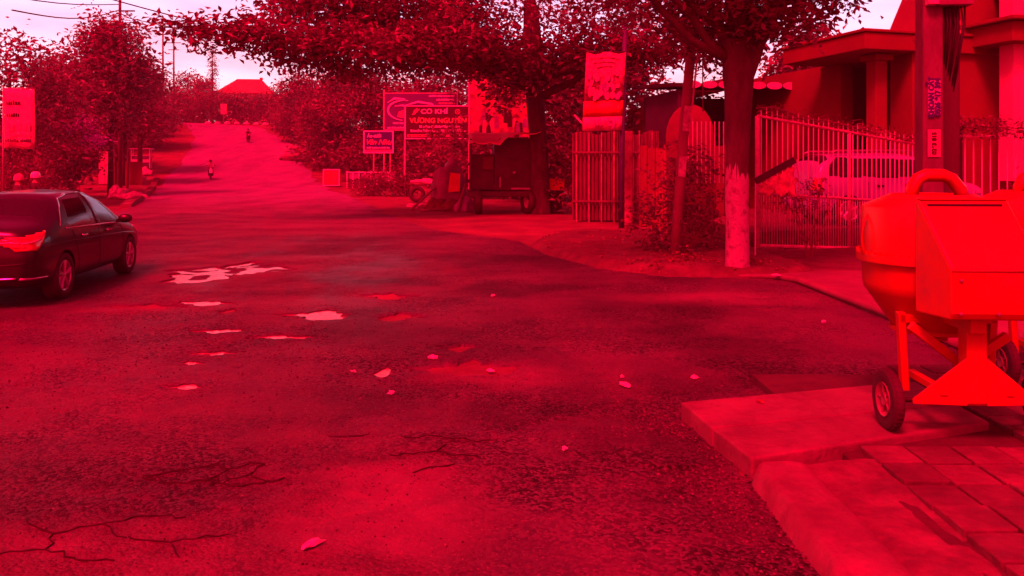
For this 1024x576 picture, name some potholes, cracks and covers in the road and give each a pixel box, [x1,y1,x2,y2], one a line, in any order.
pothole [371,311,435,322]
pothole [177,327,252,335]
pothole [160,381,216,393]
pothole [168,300,241,309]
pothole [352,292,424,301]
pothole [269,308,357,321]
pothole [155,261,303,285]
crack [142,462,285,489]
pothole [182,349,246,357]
crack [0,514,229,562]
crack [389,435,498,473]
